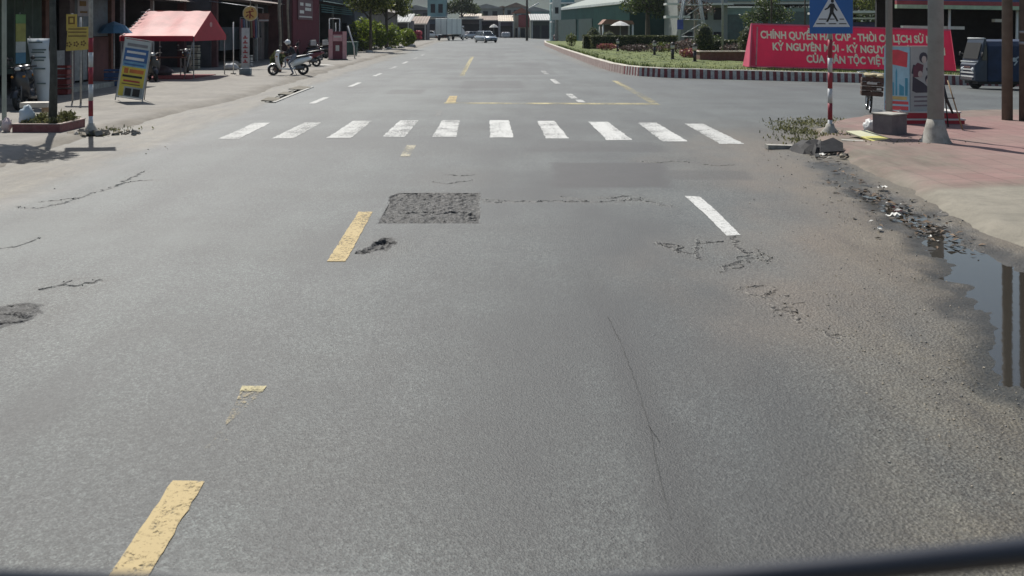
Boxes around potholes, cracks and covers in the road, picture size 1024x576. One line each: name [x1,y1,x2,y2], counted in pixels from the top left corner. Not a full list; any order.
pothole [353,237,401,255]
crack [654,236,850,341]
crack [481,195,671,207]
crack [38,279,102,290]
crack [18,171,147,209]
pothole [0,302,48,330]
